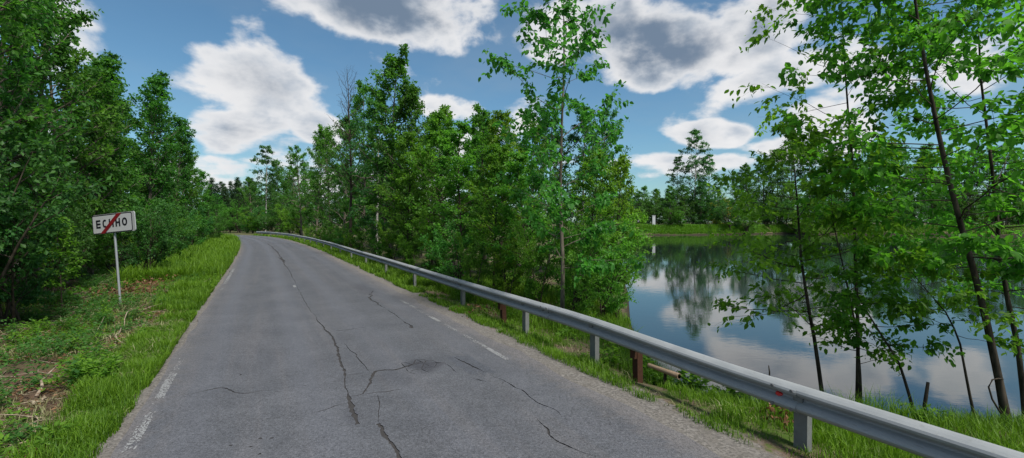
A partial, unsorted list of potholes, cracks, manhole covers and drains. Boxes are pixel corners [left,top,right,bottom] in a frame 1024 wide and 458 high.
crack [183,244,596,458]
